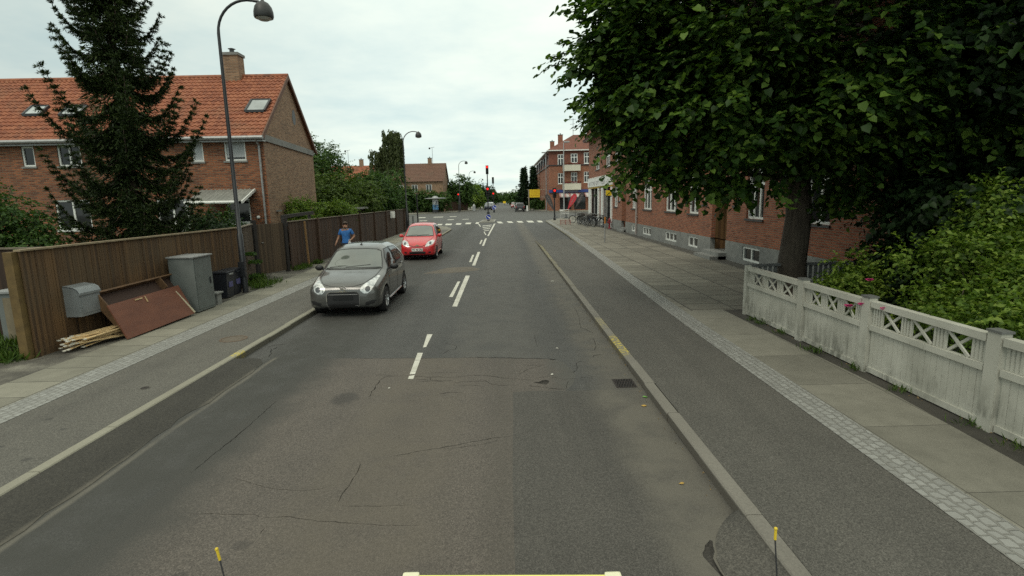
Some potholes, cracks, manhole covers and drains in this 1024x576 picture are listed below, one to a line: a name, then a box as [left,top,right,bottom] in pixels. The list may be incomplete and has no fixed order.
crack [396,436,509,456]
crack [354,335,585,396]
drain grate [612,379,637,388]
crack [206,513,406,534]
crack [237,466,360,502]
